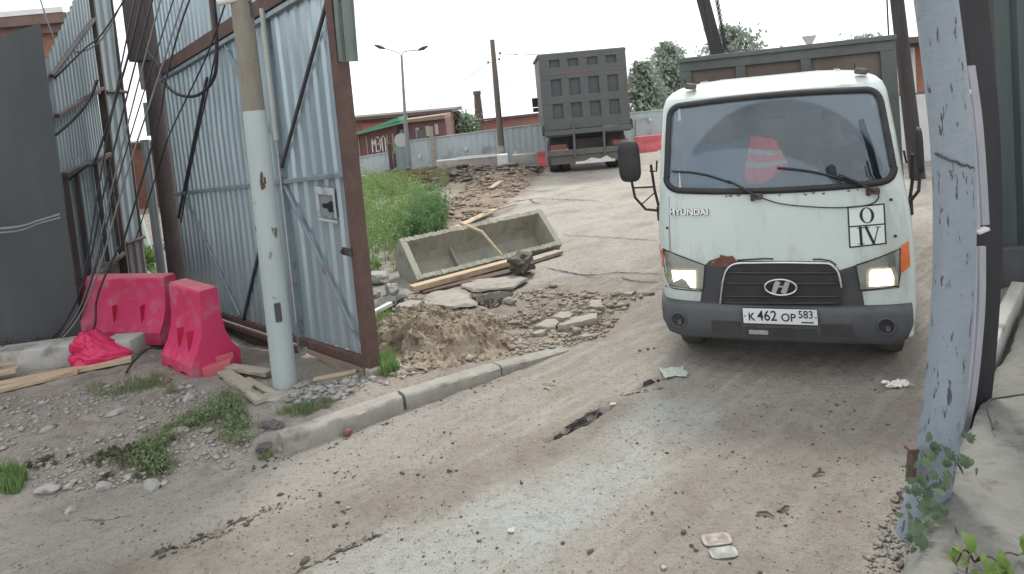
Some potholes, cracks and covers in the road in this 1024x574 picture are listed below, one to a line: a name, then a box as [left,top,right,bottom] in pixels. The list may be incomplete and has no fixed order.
crack [545,267,657,282]
crack [167,509,275,550]
